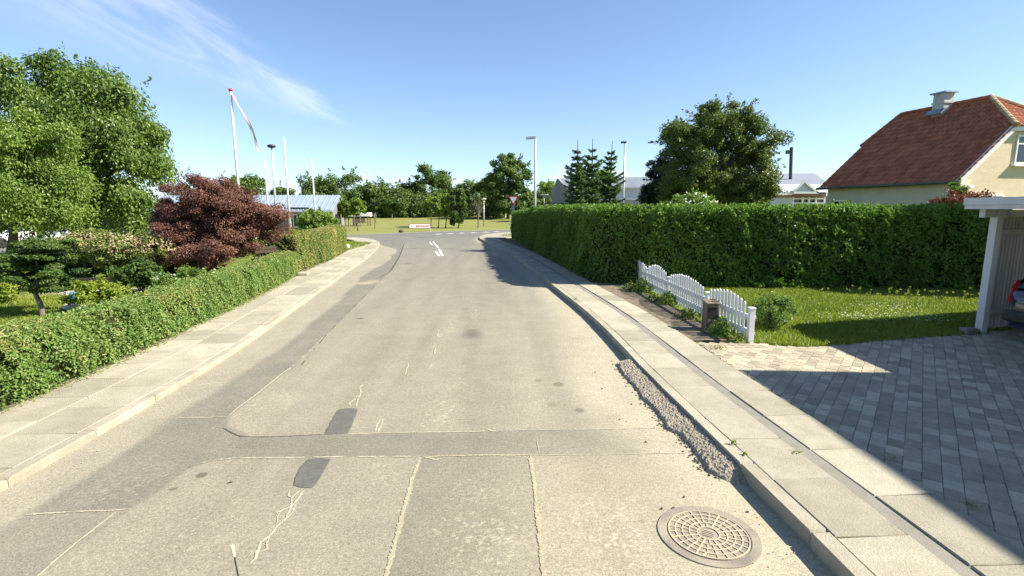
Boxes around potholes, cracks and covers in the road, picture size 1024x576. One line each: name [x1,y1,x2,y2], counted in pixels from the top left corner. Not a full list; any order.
crack [348,382,383,432]
crack [250,489,304,563]
manhole cover [657,506,763,569]
